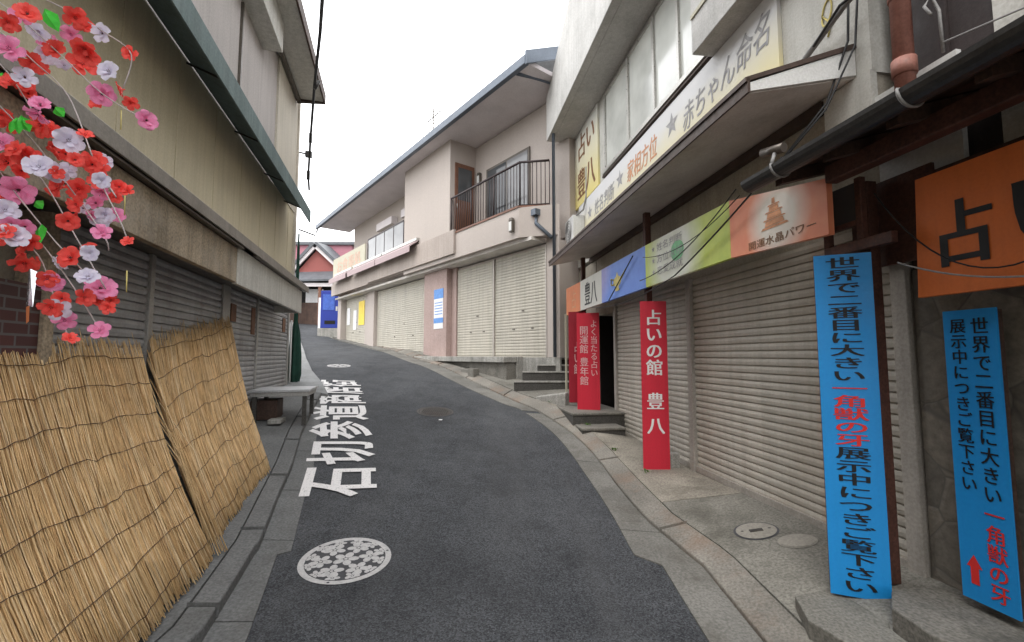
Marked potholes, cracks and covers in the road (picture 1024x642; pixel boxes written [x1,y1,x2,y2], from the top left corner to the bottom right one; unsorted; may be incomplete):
manhole cover [733,522,779,540]
manhole cover [777,534,818,548]
manhole cover [417,407,453,417]
manhole cover [297,538,391,584]
